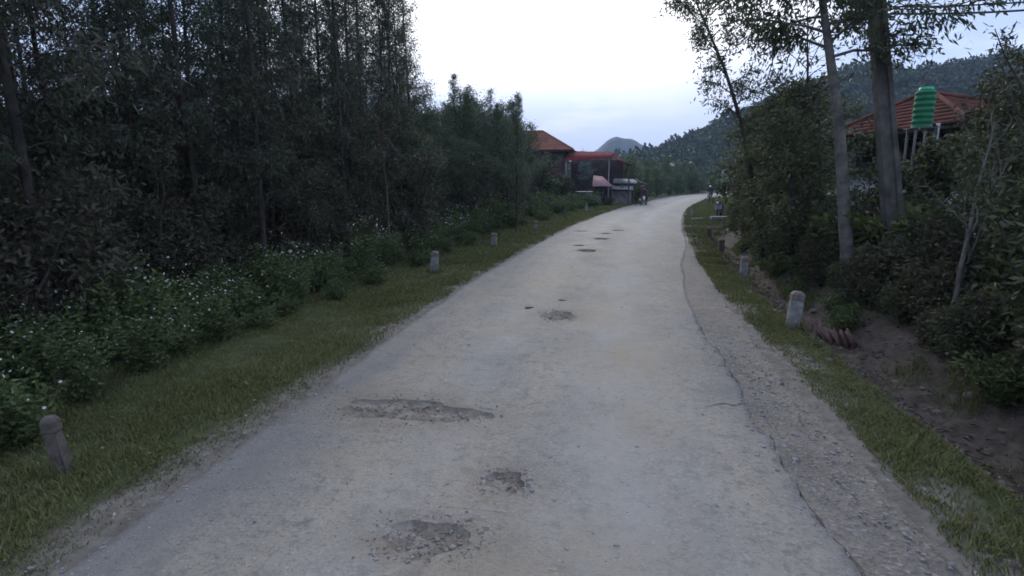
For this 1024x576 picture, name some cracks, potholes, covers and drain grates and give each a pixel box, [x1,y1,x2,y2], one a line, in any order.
pothole [485,471,525,495]
crack [694,316,866,576]
pothole [339,399,495,423]
pothole [542,311,574,320]
pothole [382,520,472,560]
